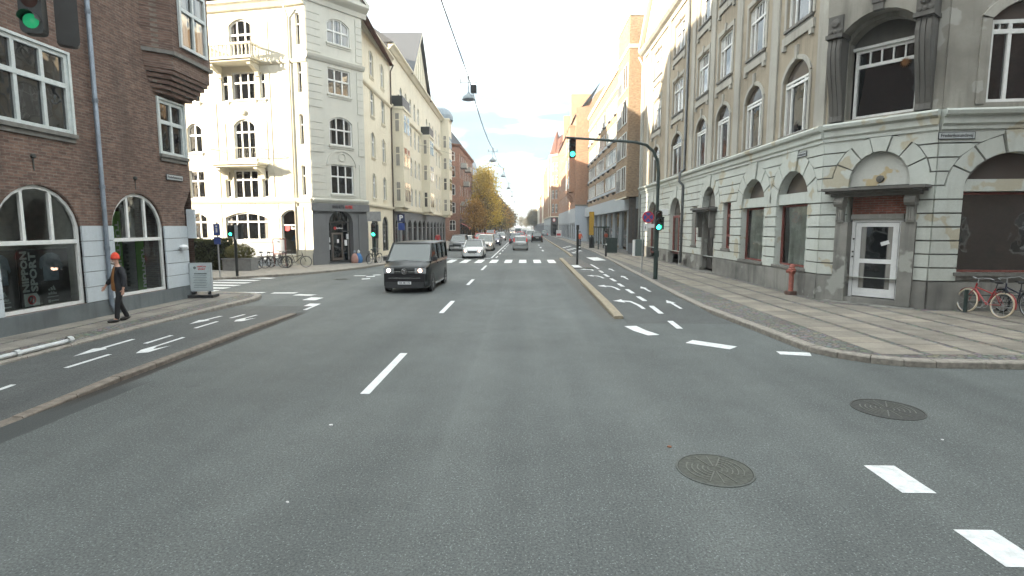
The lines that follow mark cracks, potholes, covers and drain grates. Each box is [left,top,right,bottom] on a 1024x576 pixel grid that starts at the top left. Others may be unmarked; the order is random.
manhole cover [850,399,928,421]
manhole cover [676,454,756,488]
